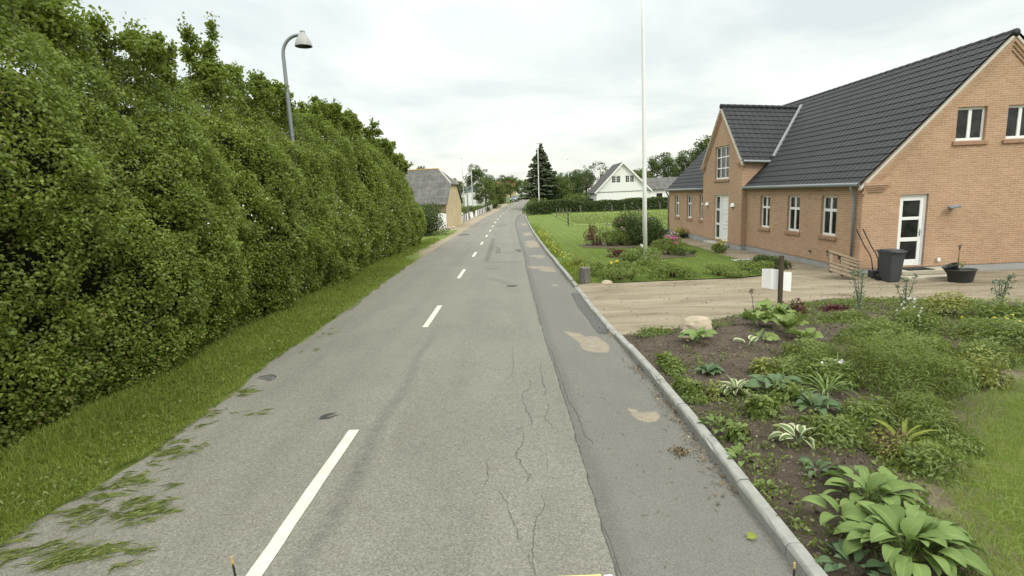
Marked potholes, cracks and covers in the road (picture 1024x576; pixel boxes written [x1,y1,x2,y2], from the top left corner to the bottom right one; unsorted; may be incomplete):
crack [483,349,593,576]
